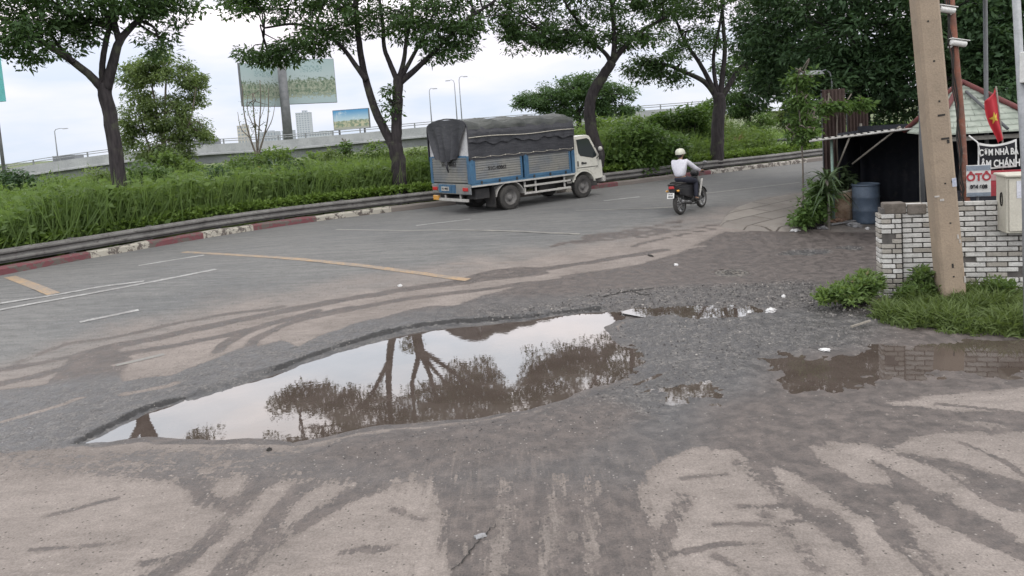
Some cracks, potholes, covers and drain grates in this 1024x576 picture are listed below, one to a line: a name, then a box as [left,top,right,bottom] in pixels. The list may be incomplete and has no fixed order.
pothole [635,375,761,417]
pothole [58,305,653,450]
crack [452,524,496,569]
pothole [751,336,1024,399]
pothole [632,303,765,320]
